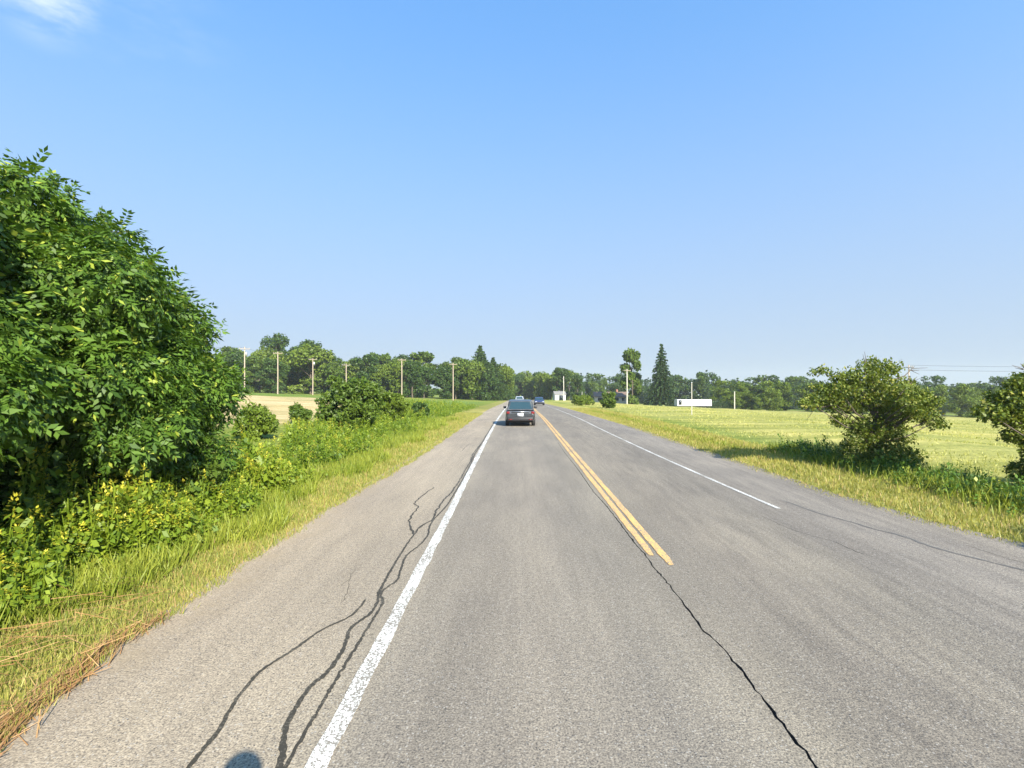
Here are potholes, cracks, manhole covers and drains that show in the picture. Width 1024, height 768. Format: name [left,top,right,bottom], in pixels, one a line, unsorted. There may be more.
crack [558,443,818,768]
